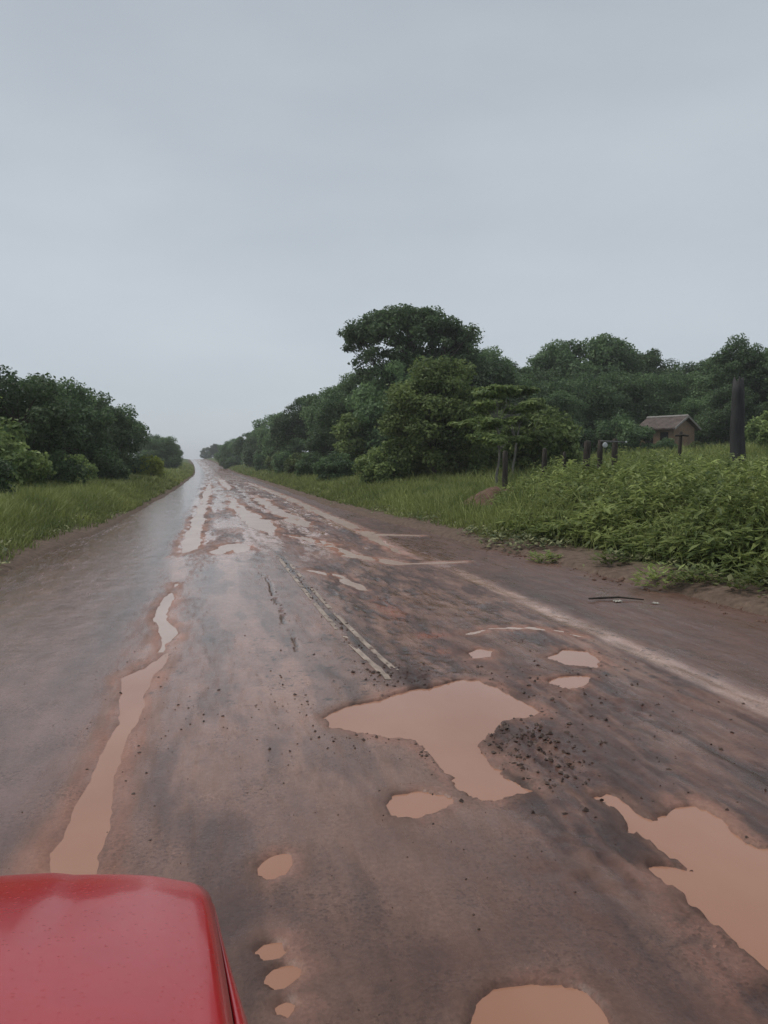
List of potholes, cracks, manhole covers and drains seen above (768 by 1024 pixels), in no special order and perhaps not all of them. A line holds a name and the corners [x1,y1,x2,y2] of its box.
pothole [231,946,334,1000]
pothole [241,984,334,1024]
pothole [307,675,557,811]
pothole [364,782,474,828]
pothole [569,784,768,1009]
pothole [225,922,319,969]
pothole [533,646,614,671]
crack [261,572,306,653]
pothole [424,959,651,1024]
pothole [529,672,606,694]
